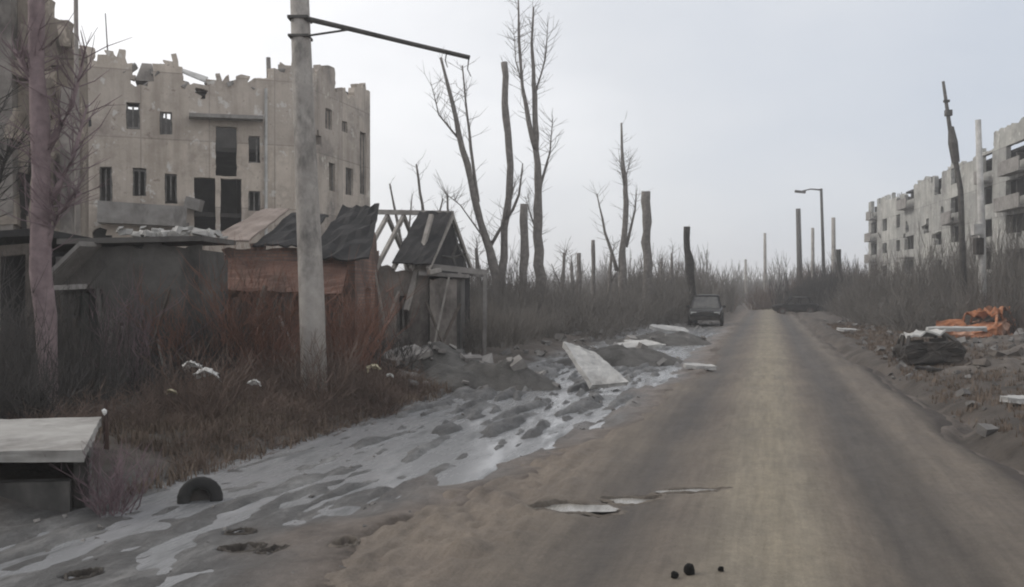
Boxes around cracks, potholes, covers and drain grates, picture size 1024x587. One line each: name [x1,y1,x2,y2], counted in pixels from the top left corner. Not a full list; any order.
pothole [256,544,290,554]
pothole [328,535,361,548]
pothole [646,486,733,496]
pothole [595,494,667,506]
pothole [223,527,257,535]
pothole [217,542,268,553]
pothole [63,567,104,581]
pothole [521,498,628,518]
